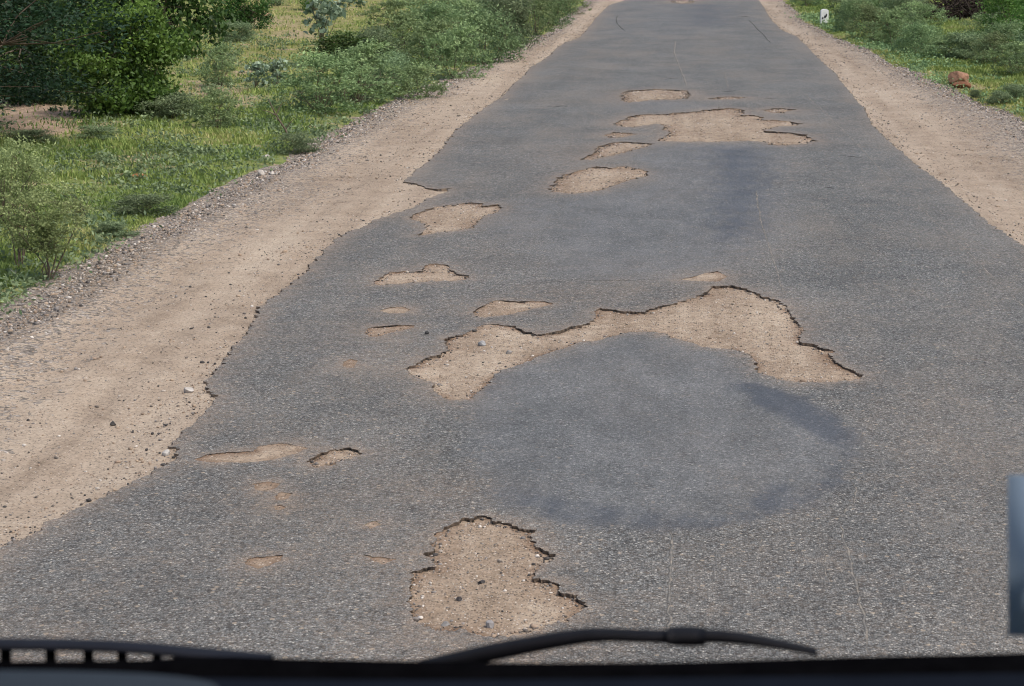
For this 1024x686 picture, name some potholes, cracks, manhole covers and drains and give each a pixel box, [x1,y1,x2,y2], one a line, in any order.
pothole [364,325,415,337]
pothole [580,142,655,160]
pothole [306,448,362,468]
pothole [406,516,588,638]
crack [670,40,687,86]
pothole [614,107,816,146]
crack [816,480,869,653]
pothole [374,264,469,285]
pothole [406,285,865,400]
pothole [548,166,649,194]
crack [651,529,674,650]
pothole [410,202,503,236]
